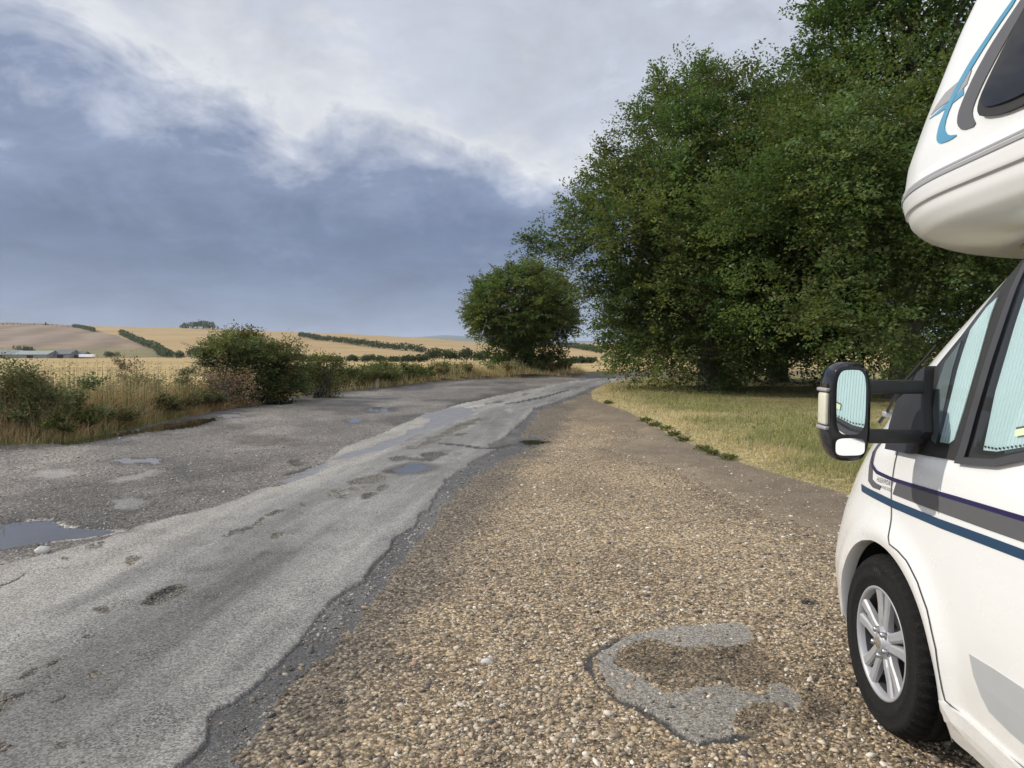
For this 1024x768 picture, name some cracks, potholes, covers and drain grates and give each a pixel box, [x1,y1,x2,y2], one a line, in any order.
pothole [140,584,188,605]
pothole [346,473,388,485]
